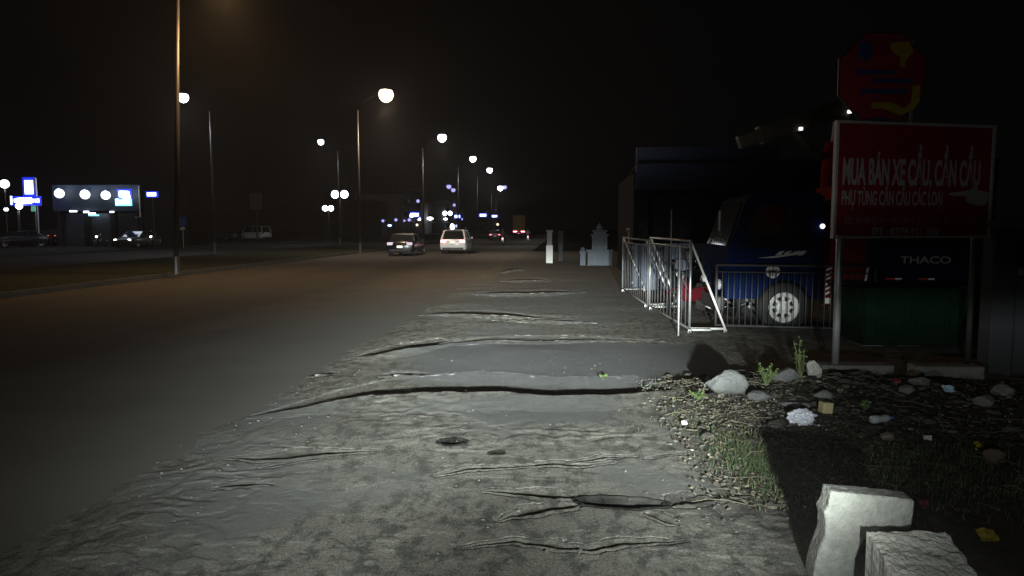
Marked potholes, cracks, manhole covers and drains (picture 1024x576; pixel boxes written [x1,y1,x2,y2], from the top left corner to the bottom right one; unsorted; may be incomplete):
crack [430,452,761,555]
pothole [435,438,469,446]
crack [246,268,690,419]
crack [193,432,392,490]
